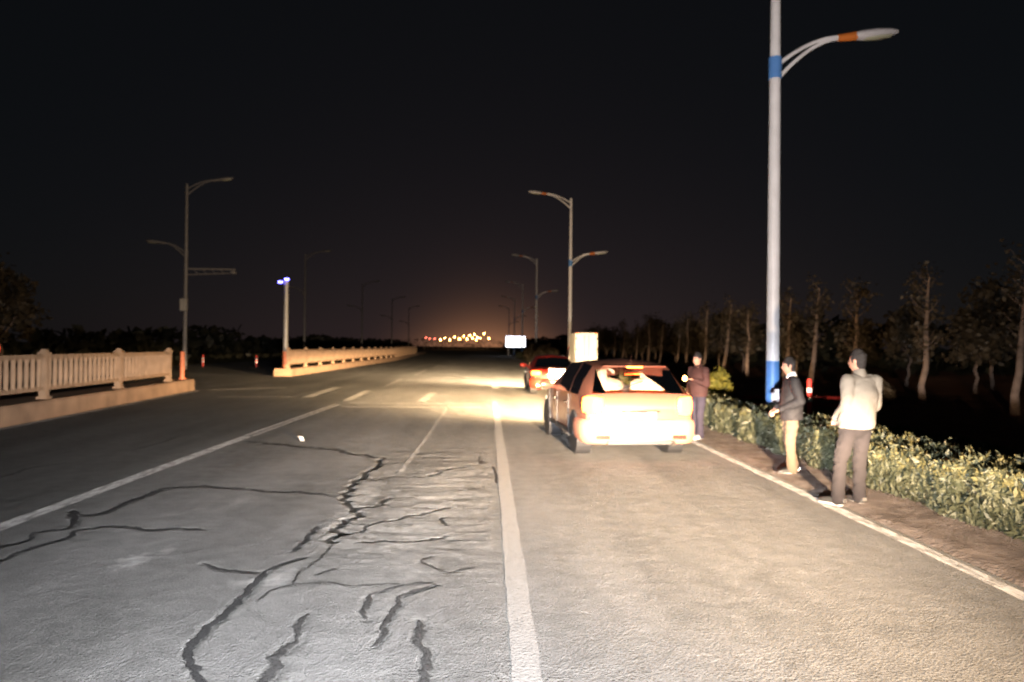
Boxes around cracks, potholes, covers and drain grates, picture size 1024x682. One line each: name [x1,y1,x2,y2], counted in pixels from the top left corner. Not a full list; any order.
crack [0,441,498,648]
